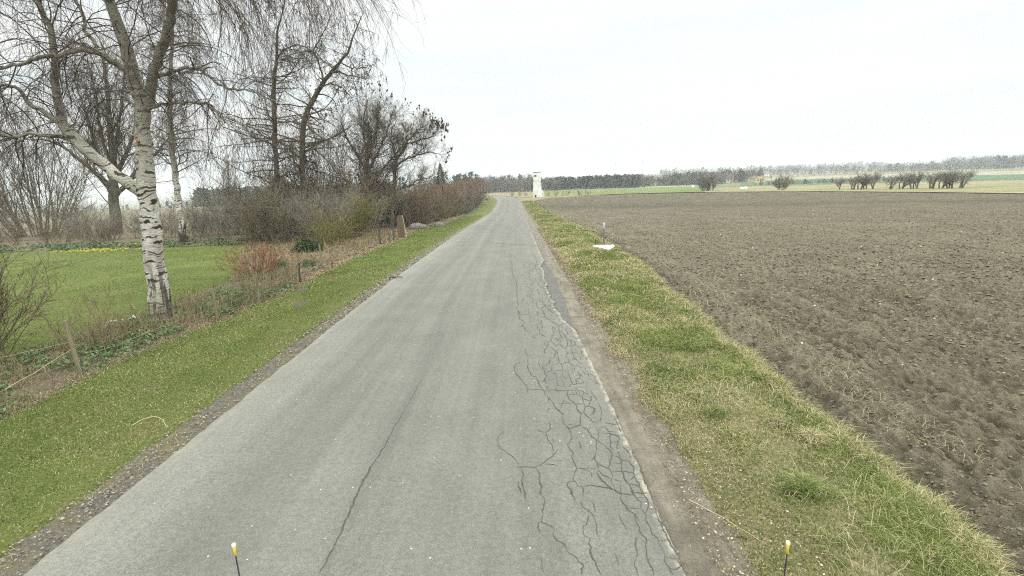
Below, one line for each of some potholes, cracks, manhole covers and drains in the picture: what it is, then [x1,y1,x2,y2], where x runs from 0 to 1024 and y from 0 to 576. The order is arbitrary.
crack [497,255,689,575]
crack [320,383,420,571]
